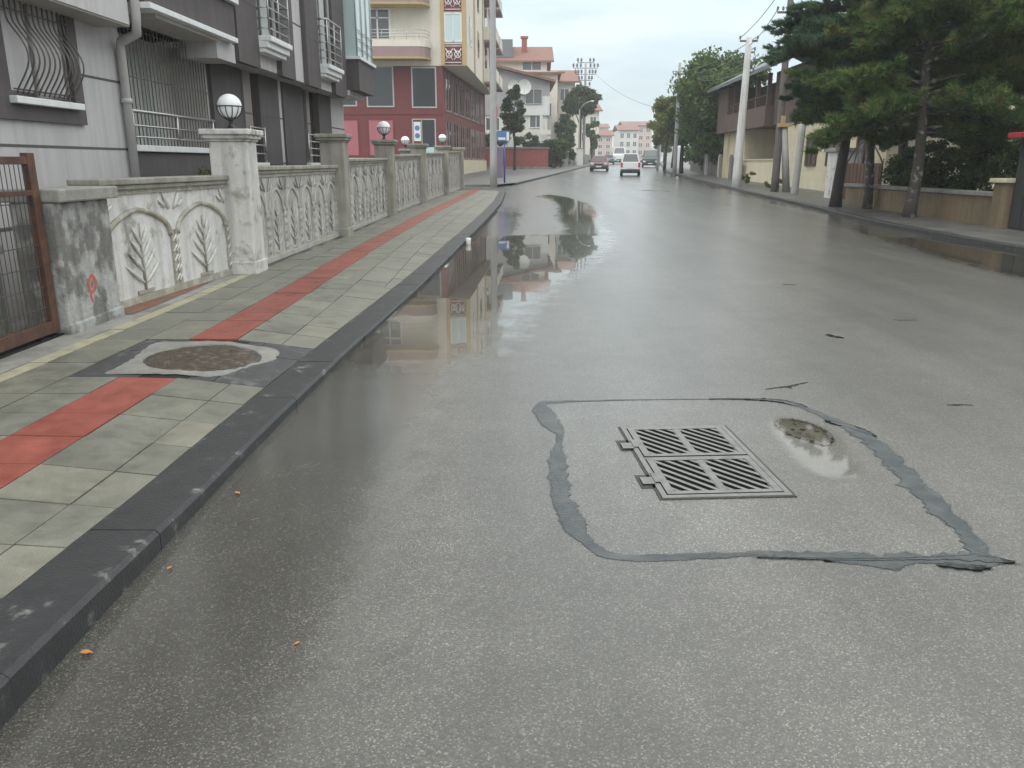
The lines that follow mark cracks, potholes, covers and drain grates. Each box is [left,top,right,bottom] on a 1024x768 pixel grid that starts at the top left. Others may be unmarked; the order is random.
pothole [775,418,835,446]
drain grate [615,425,797,500]
manhole cover [105,341,280,377]
